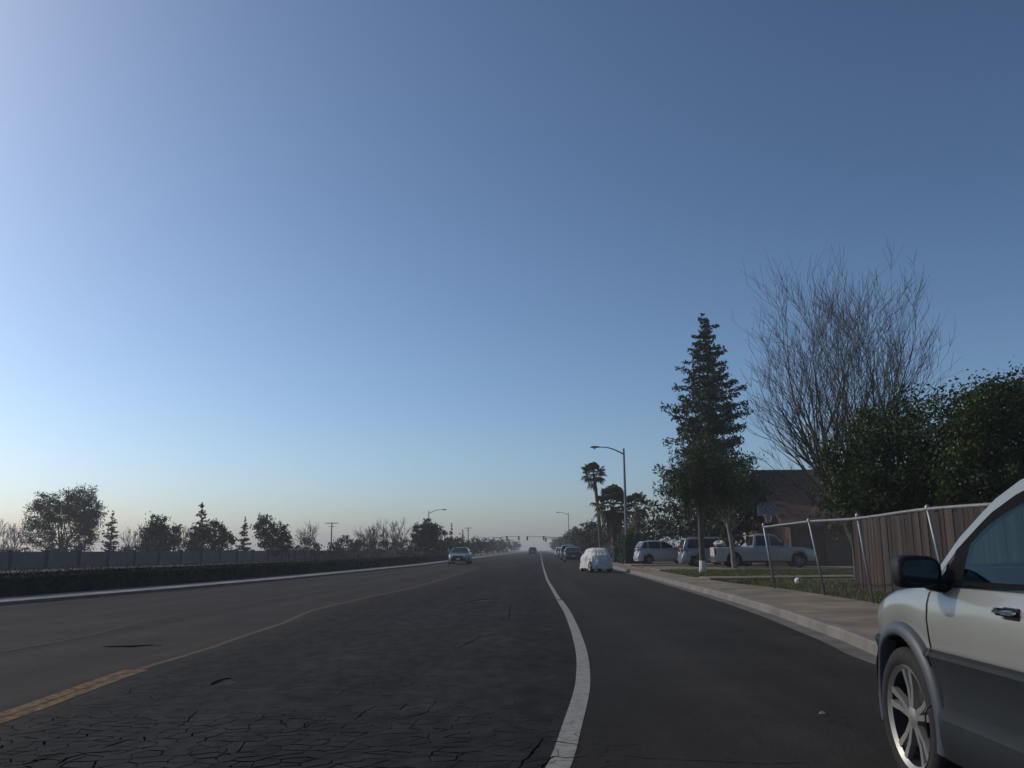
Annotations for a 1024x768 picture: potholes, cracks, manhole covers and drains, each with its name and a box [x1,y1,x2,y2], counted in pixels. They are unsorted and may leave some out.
pothole [211,678,237,686]
crack [448,599,512,619]
crack [0,636,659,768]
